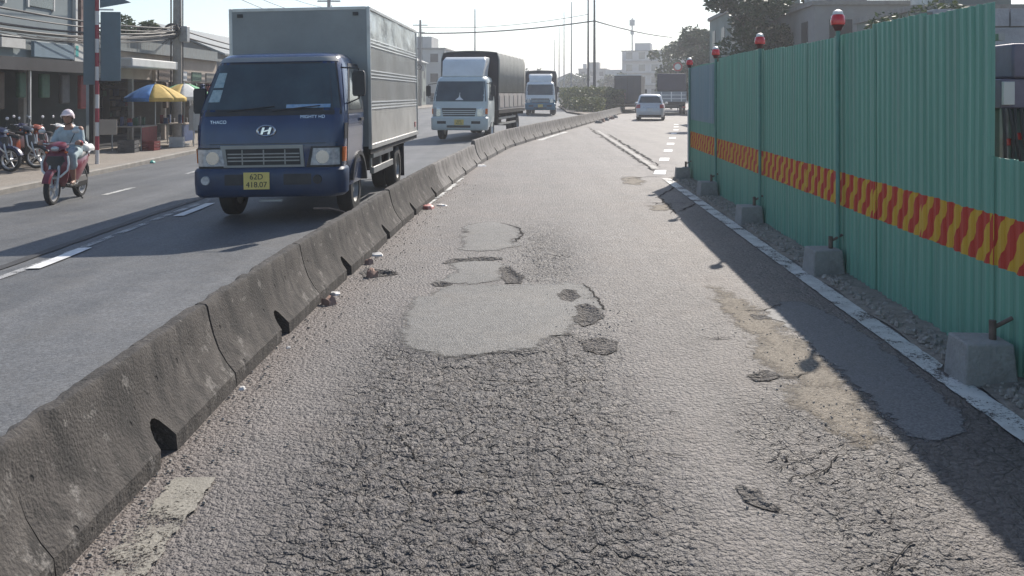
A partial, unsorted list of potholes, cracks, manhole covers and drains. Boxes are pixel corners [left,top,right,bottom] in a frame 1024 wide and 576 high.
pothole [500,266,525,284]
pothole [748,370,781,381]
pothole [735,484,780,511]
pothole [574,303,605,326]
pothole [581,337,619,355]
crack [763,433,880,483]
pothole [557,289,581,301]
crack [376,418,519,497]
